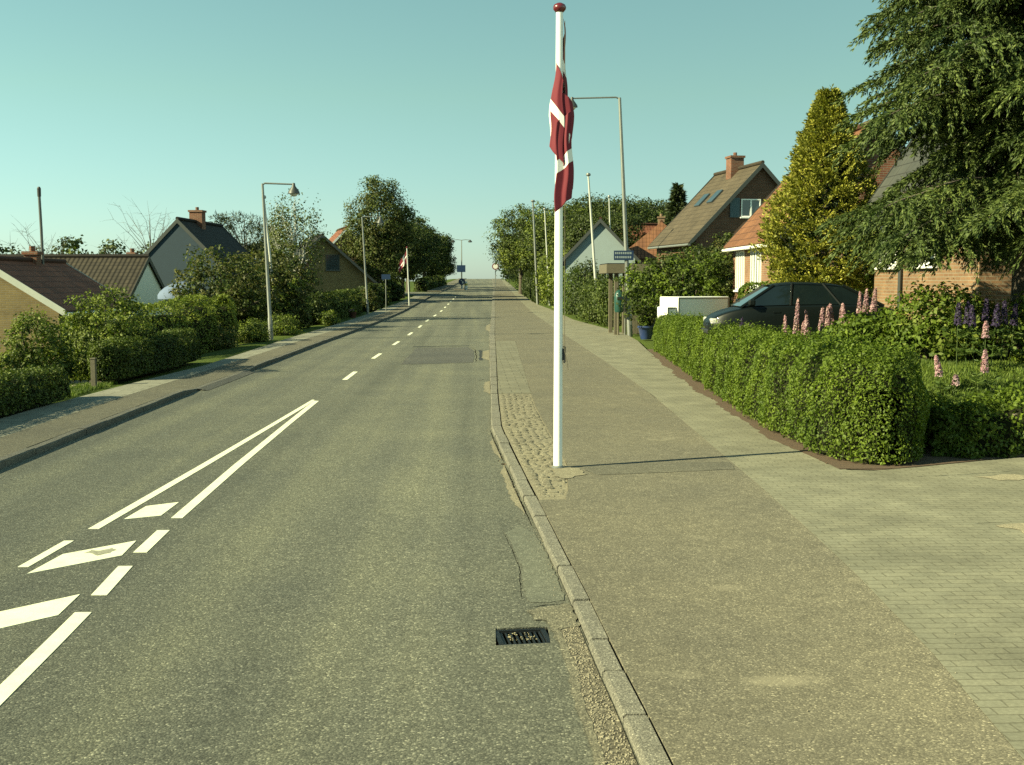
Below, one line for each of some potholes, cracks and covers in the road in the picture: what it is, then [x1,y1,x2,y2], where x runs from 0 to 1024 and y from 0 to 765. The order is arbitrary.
drain grate [496,628,551,645]
